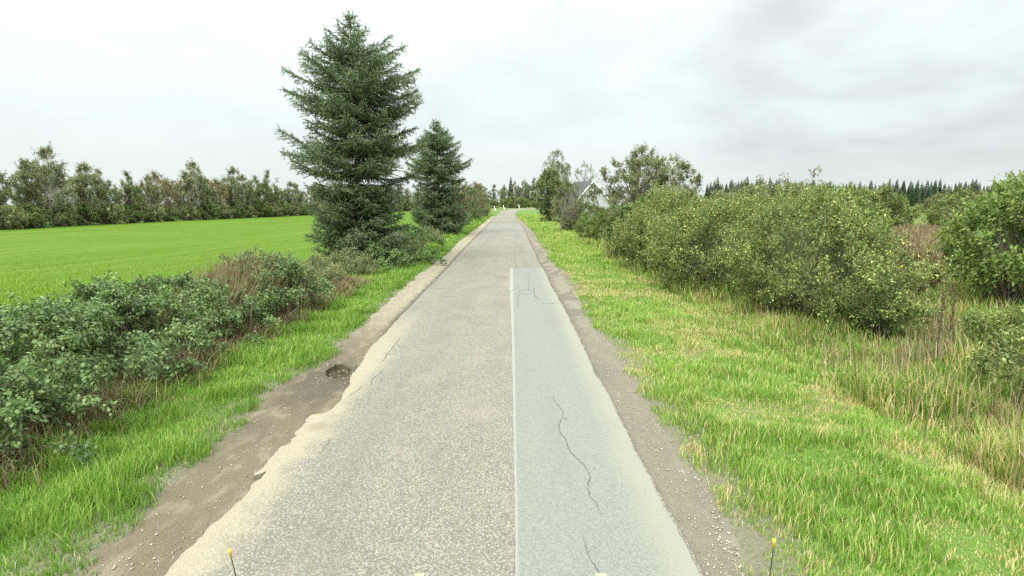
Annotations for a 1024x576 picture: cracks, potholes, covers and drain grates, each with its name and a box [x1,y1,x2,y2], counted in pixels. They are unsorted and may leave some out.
crack [553,399,602,514]
pothole [323,362,355,381]
